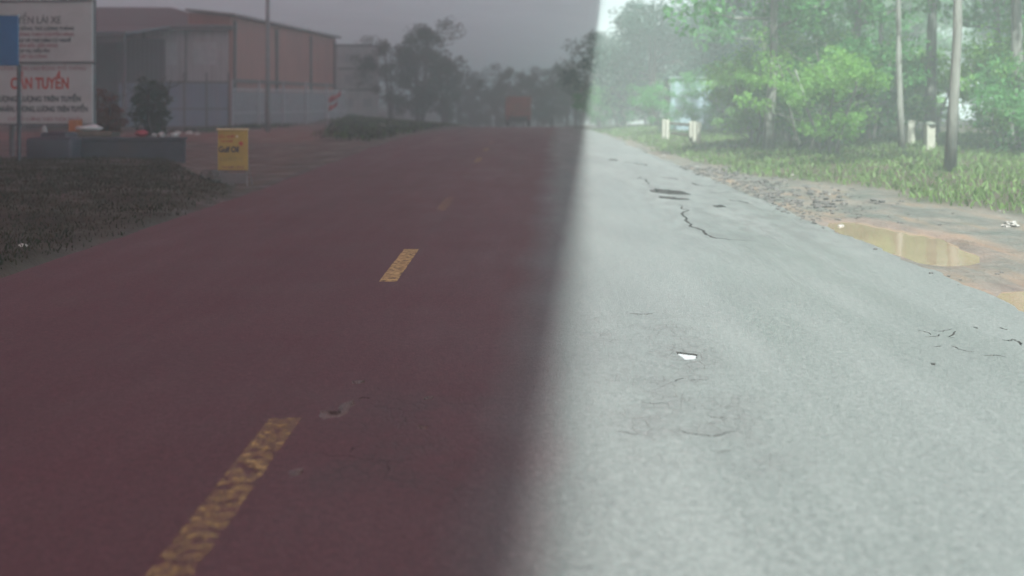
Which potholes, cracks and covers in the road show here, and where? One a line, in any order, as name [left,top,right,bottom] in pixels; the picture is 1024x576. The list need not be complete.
pothole [318,400,355,420]
crack [920,327,1022,357]
pothole [648,186,691,195]
crack [678,416,734,452]
crack [680,205,749,241]
